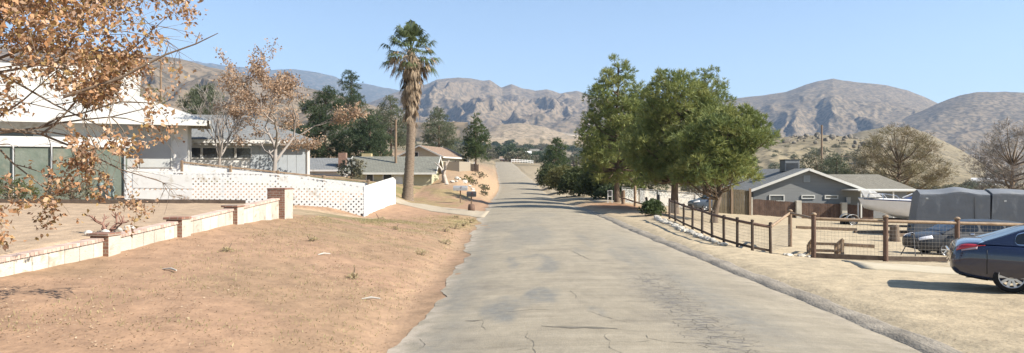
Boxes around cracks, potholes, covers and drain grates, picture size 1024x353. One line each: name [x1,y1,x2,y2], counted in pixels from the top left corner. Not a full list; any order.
crack [518,272,760,353]
